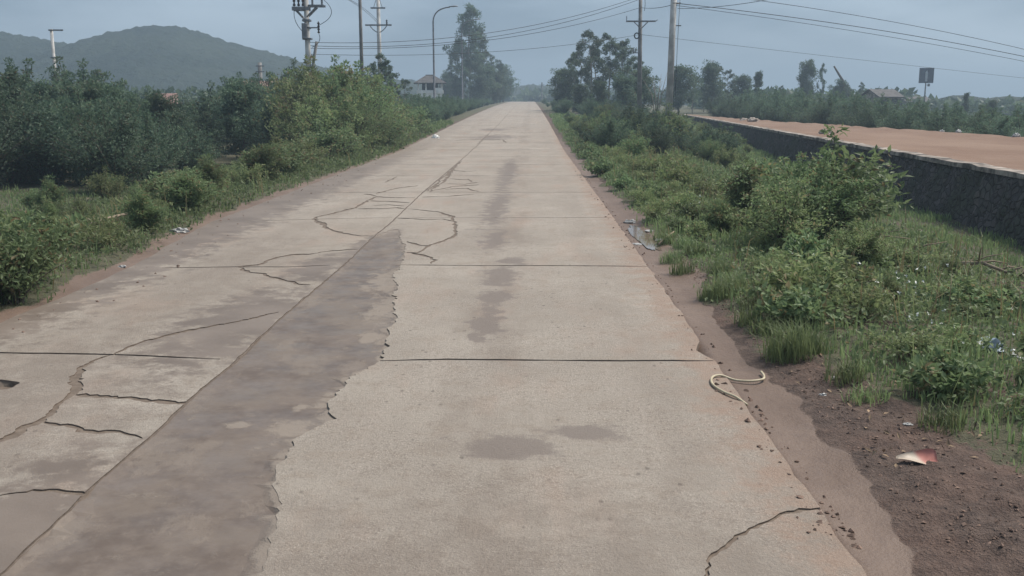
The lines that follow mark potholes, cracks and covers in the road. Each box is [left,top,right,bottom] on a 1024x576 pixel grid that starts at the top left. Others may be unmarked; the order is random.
crack [0,312,278,442]
crack [704,507,820,576]
crack [237,161,478,285]
